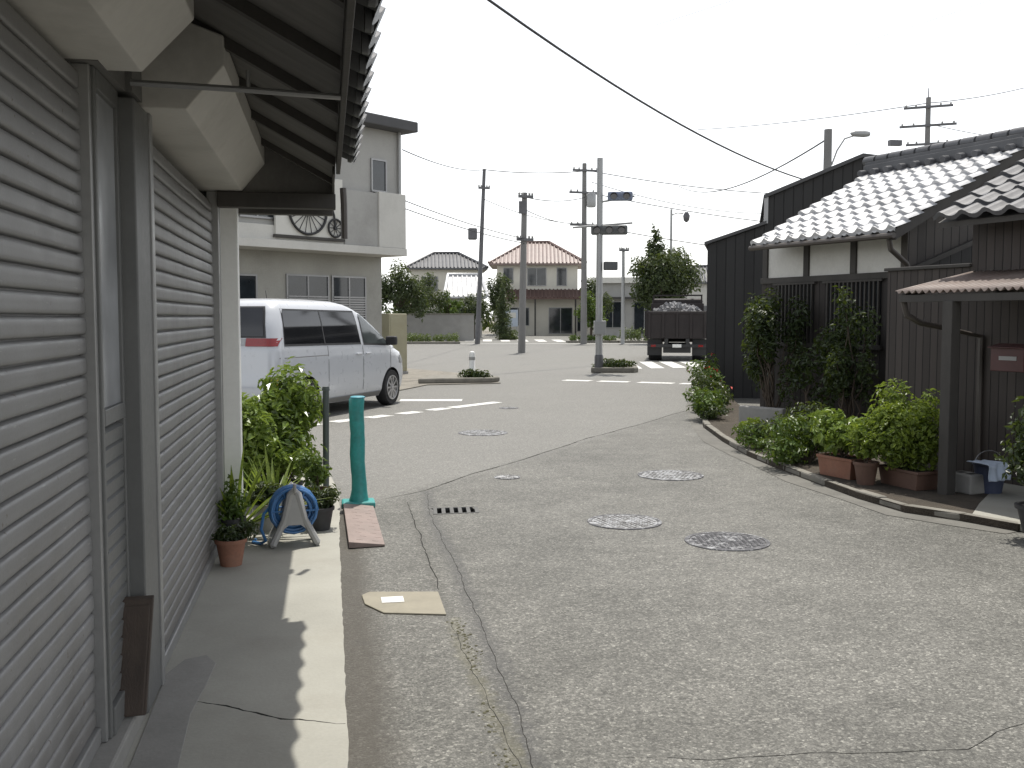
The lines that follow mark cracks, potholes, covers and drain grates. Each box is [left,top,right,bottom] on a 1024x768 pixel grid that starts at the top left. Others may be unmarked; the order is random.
manhole cover [638,470,704,481]
manhole cover [684,532,771,551]
crack [626,724,1022,760]
crack [202,702,346,724]
manhole cover [587,514,662,530]
crack [407,495,533,768]
drain grate [431,506,479,515]
